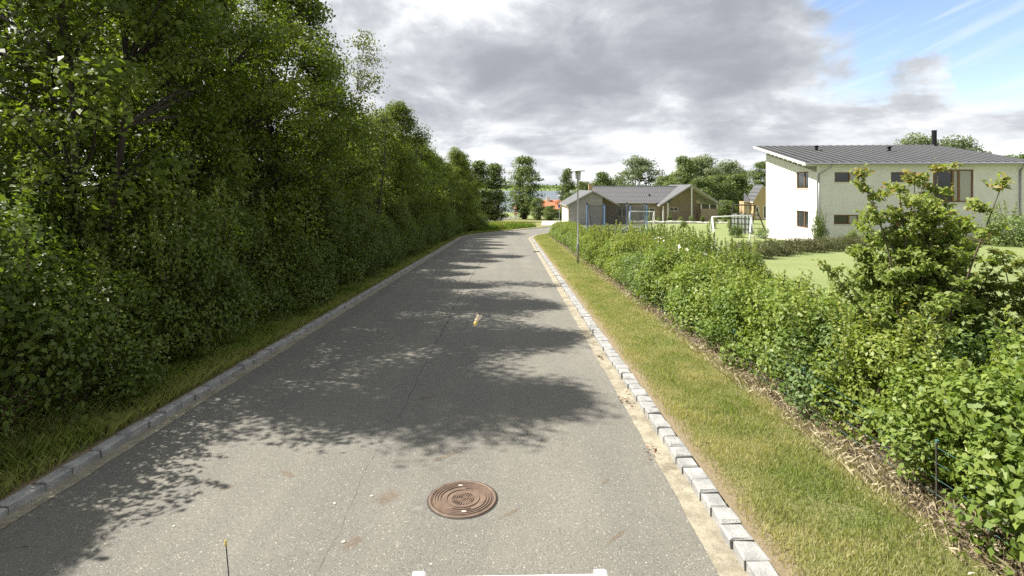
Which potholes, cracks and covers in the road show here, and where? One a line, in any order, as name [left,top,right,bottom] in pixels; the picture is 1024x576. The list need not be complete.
manhole cover [427,481,498,520]
